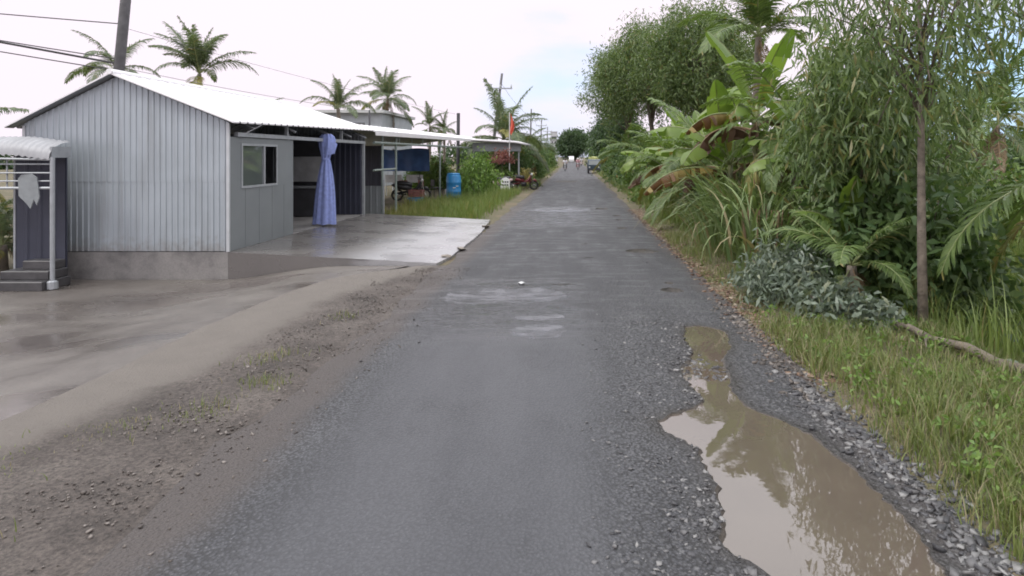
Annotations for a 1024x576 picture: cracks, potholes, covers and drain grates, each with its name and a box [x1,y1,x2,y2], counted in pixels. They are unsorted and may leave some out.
pothole [658,325,947,576]
